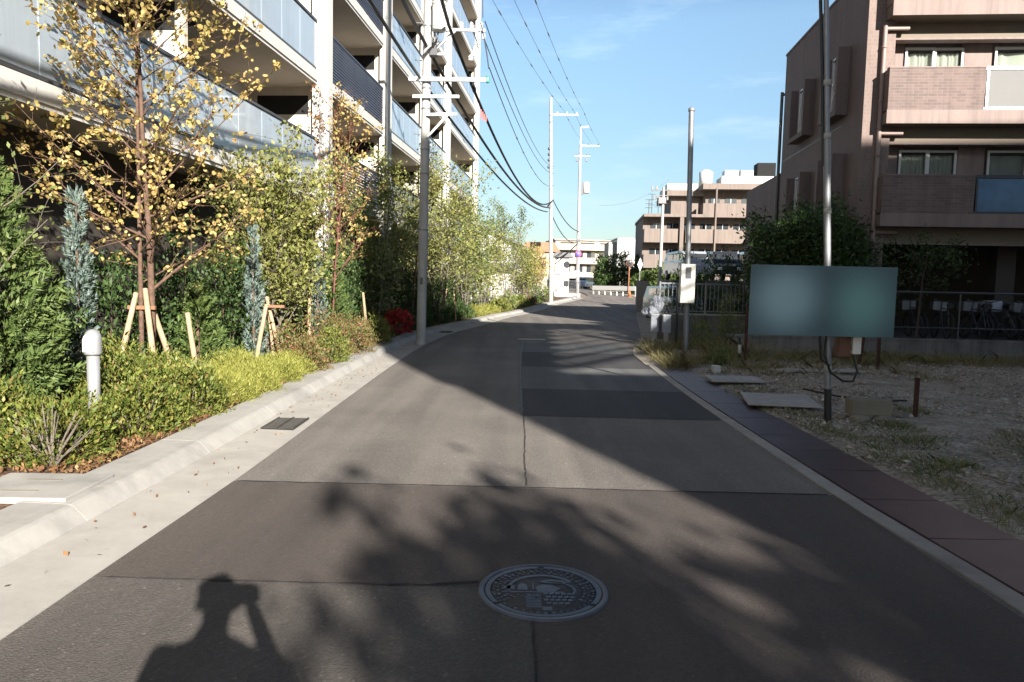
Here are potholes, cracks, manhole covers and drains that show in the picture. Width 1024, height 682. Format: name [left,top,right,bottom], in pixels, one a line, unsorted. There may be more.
manhole cover [478,564,609,622]
drain grate [260,417,309,430]
